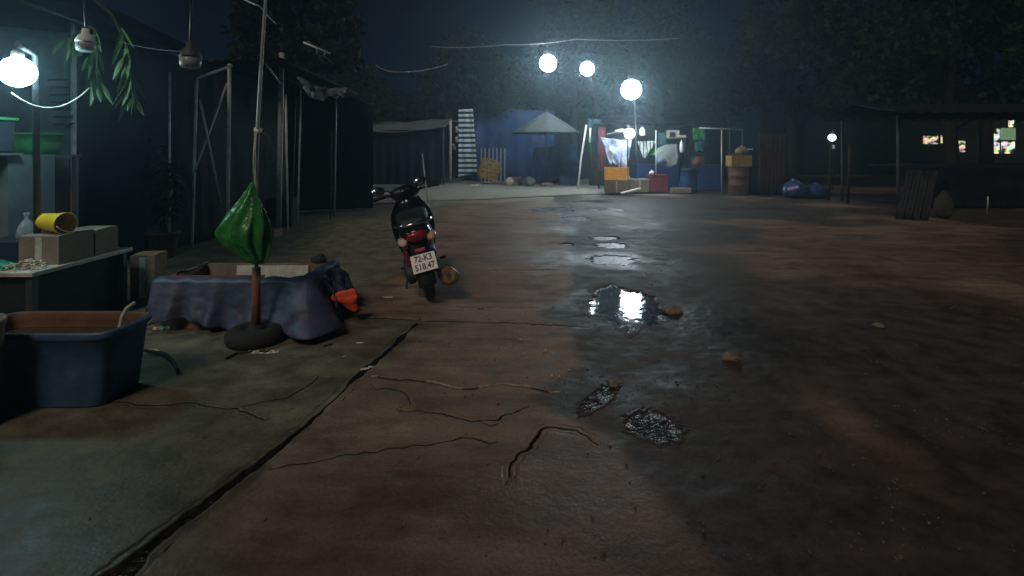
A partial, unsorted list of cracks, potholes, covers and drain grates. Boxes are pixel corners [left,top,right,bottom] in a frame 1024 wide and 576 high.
crack [106,375,601,486]
pothole [578,281,678,339]
pothole [574,382,623,419]
pothole [617,405,692,449]
pothole [585,254,639,267]
